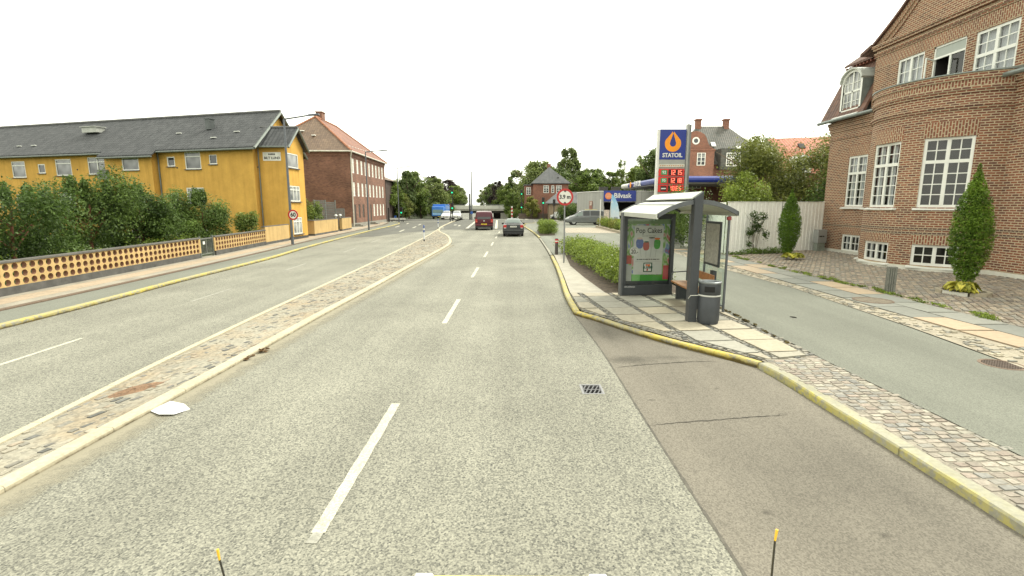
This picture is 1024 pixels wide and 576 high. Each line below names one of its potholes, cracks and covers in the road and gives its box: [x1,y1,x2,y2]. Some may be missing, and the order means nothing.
drain grate [579,384,605,394]
manhole cover [977,359,1024,371]
